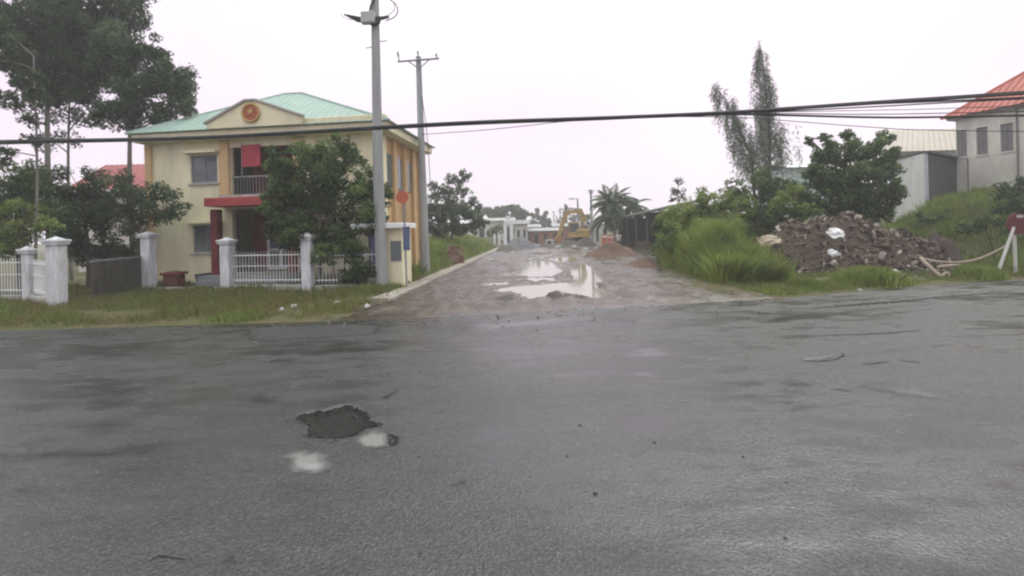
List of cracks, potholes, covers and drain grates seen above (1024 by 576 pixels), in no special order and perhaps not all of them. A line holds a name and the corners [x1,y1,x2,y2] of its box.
pothole [285,404,391,446]
